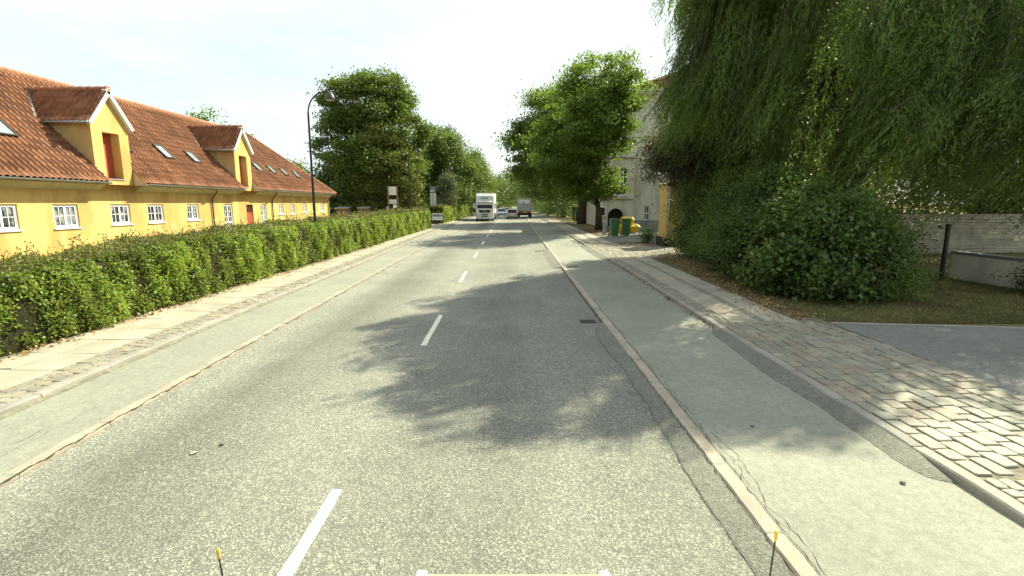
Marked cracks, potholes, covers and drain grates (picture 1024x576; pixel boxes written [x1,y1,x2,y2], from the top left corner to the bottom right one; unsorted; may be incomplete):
crack [613,324,827,576]
